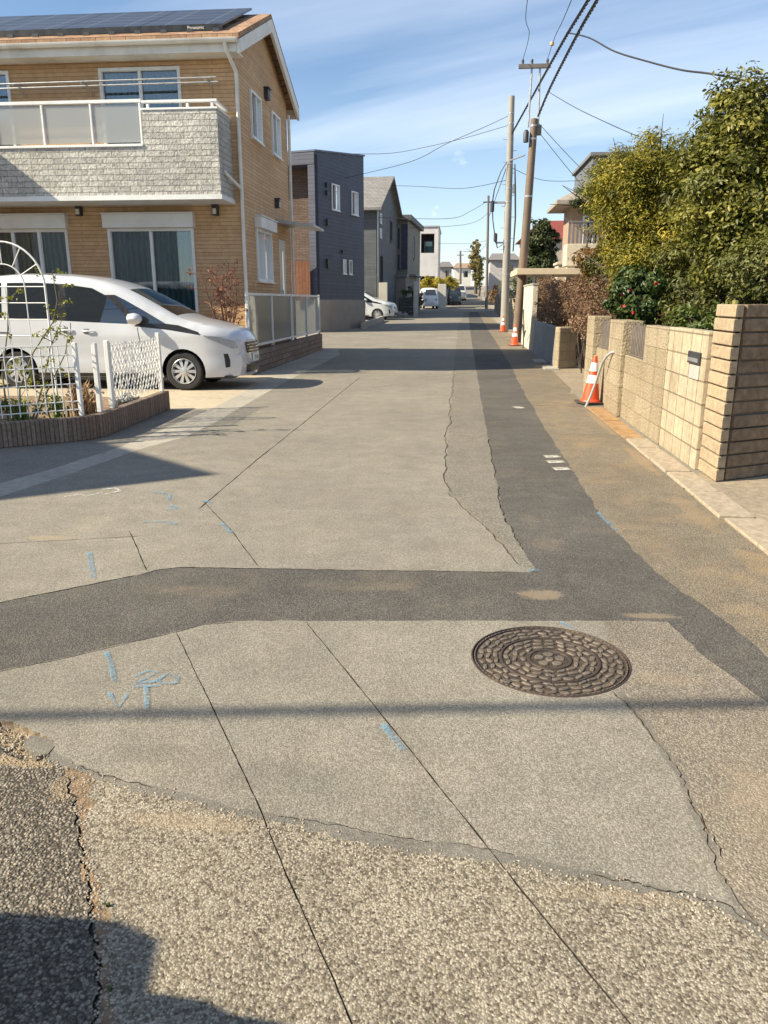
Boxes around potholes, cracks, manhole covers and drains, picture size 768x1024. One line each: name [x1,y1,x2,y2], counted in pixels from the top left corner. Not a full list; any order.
crack [66,622,768,1024]
crack [443,369,520,565]
manhole cover [471,626,632,698]
